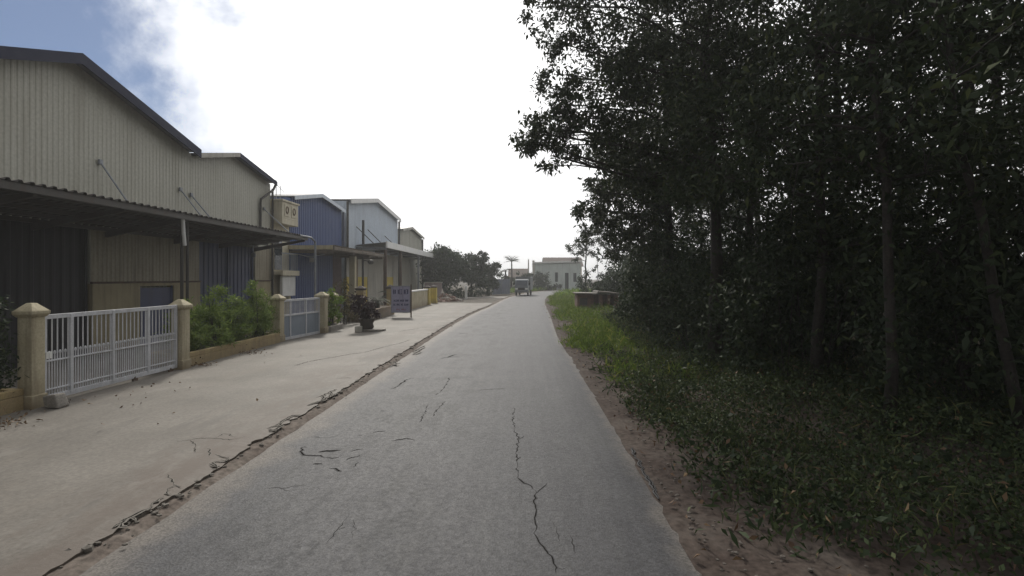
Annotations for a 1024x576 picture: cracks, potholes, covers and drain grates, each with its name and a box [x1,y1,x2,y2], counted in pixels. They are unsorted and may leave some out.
crack [177,434,243,467]
crack [511,408,575,573]
crack [268,377,451,472]
